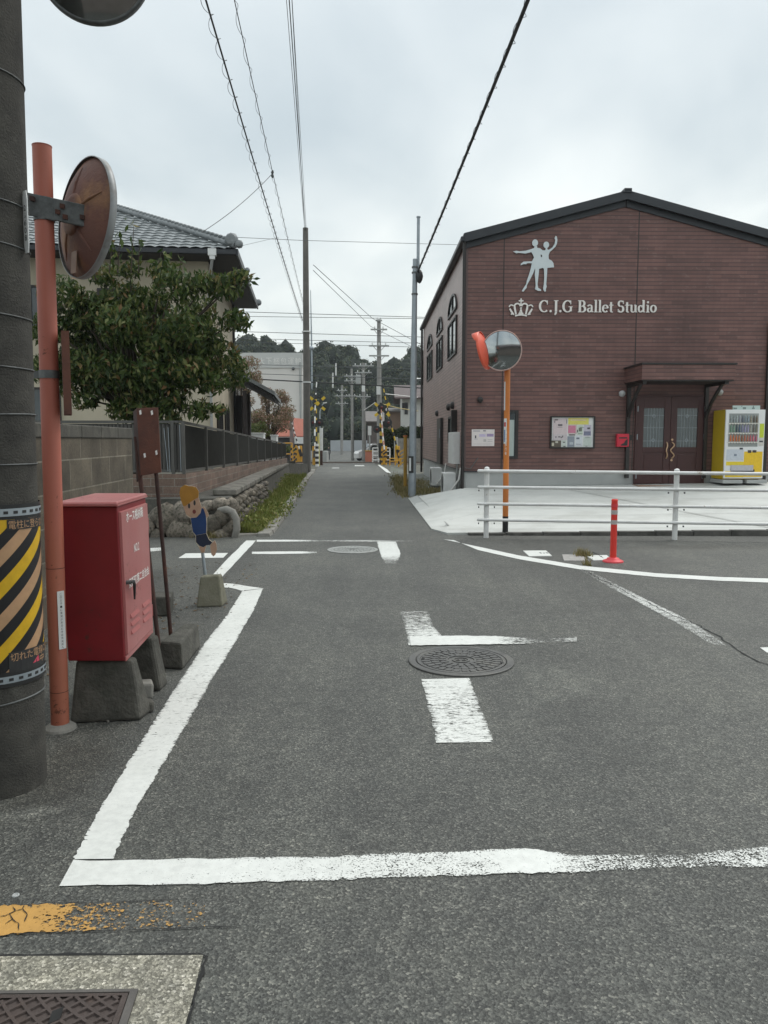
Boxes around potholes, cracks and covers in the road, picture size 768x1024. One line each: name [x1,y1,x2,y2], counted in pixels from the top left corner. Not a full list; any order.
crack [3,906,28,930]
manhole cover [409,646,514,677]
manhole cover [327,546,378,554]
